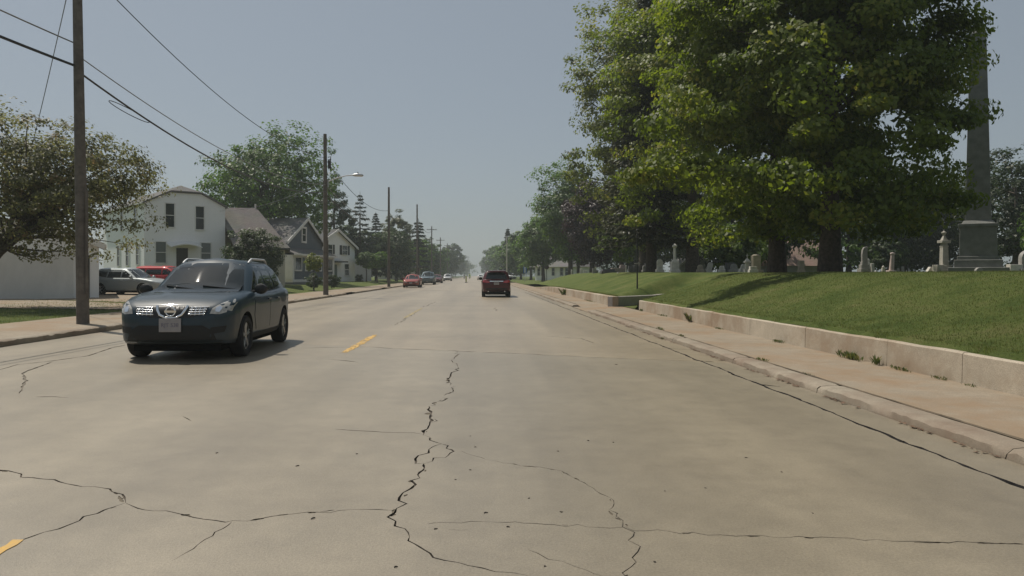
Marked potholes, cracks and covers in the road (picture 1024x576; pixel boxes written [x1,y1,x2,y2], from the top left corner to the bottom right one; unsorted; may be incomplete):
crack [0,352,1020,576]
